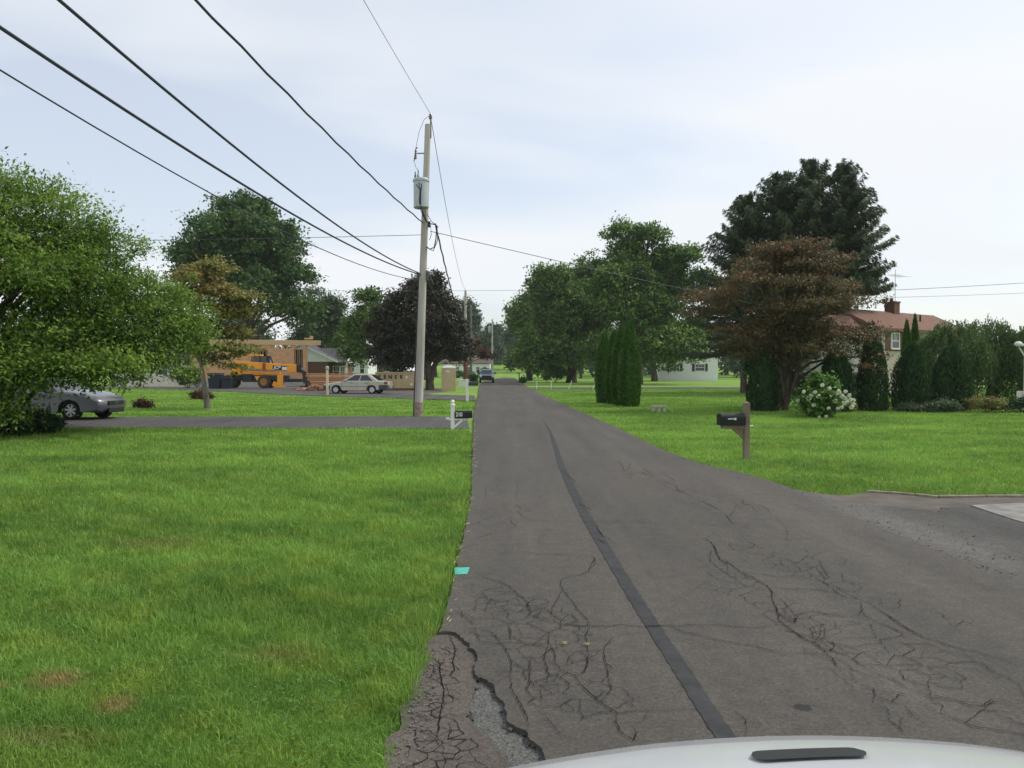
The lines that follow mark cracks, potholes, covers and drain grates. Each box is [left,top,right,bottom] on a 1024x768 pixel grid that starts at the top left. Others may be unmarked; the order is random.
crack [478,461,797,575]
pothole [466,682,544,767]
crack [458,533,1024,740]
crack [407,636,488,768]
